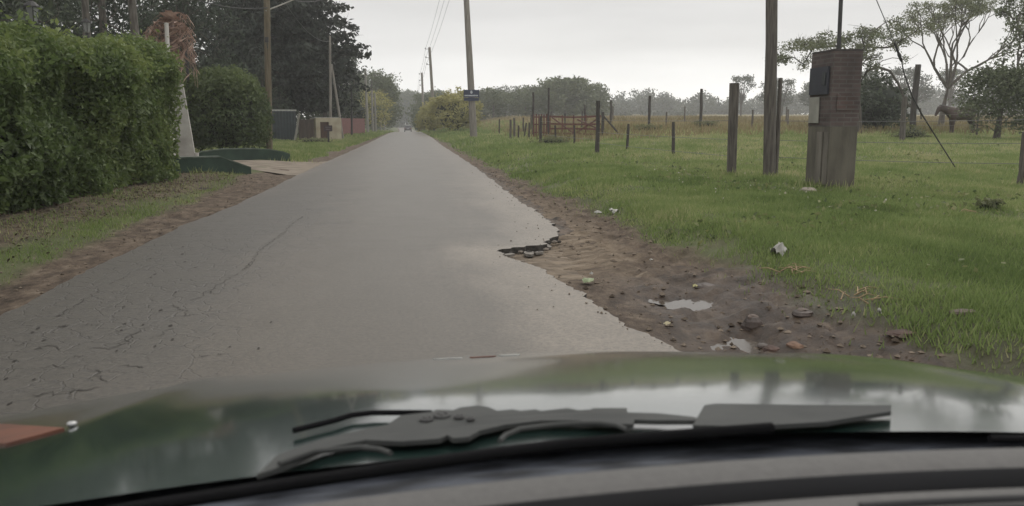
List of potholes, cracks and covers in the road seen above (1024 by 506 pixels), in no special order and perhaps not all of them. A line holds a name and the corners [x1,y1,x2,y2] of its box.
crack [29,218,302,396]
